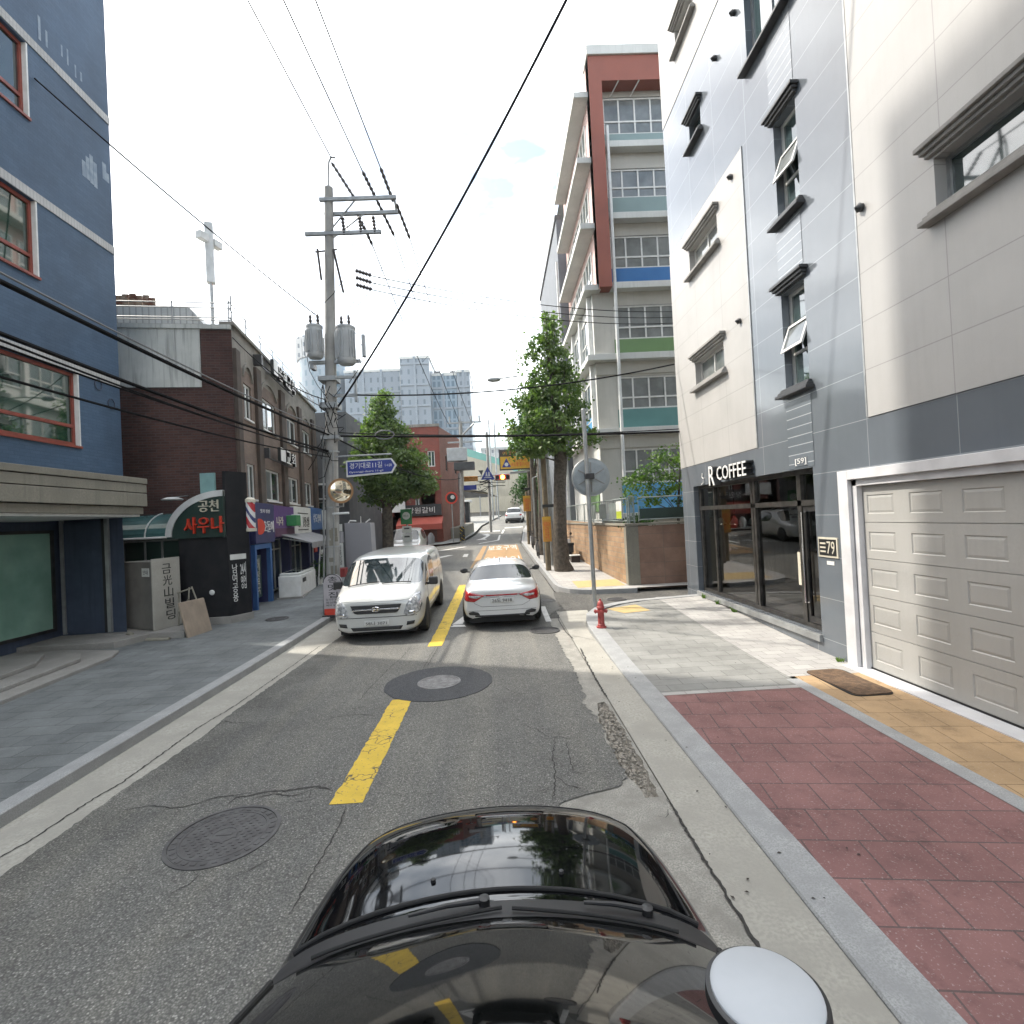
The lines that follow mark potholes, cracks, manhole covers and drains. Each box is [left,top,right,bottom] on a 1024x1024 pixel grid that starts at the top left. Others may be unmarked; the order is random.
crack [520,724,588,799]
pothole [597,702,659,798]
manhole cover [162,805,281,871]
manhole cover [384,666,492,702]
crack [125,785,333,819]
